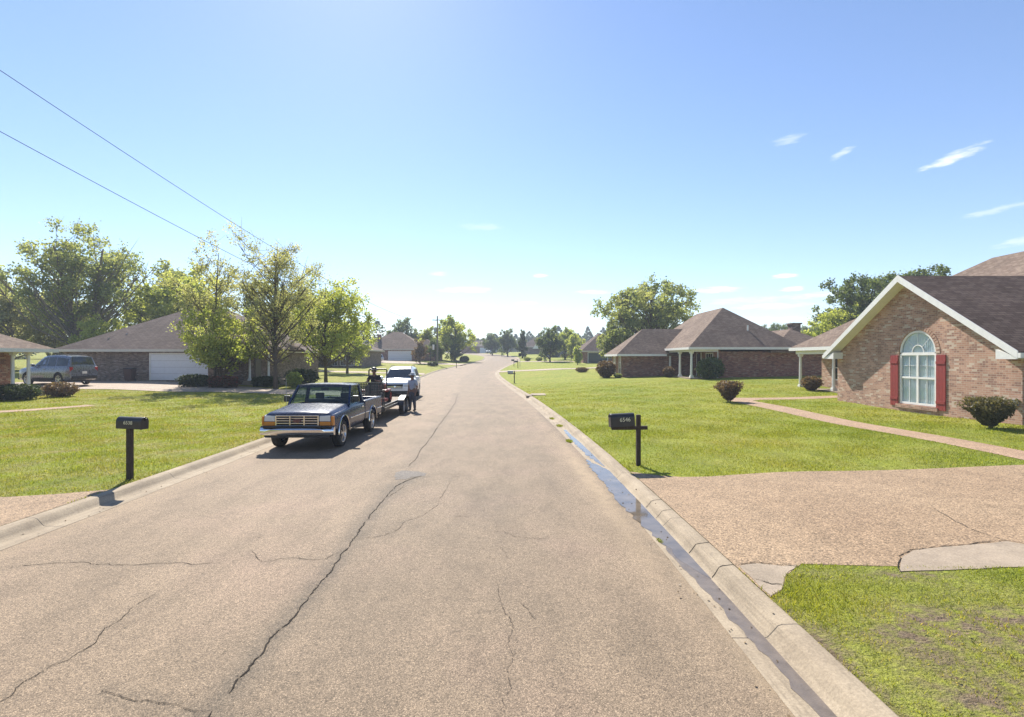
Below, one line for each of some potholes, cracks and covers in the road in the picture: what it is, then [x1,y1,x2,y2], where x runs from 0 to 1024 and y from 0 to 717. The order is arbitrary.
crack [1,594,155,701]
crack [102,690,212,717]
crack [497,582,535,706]
